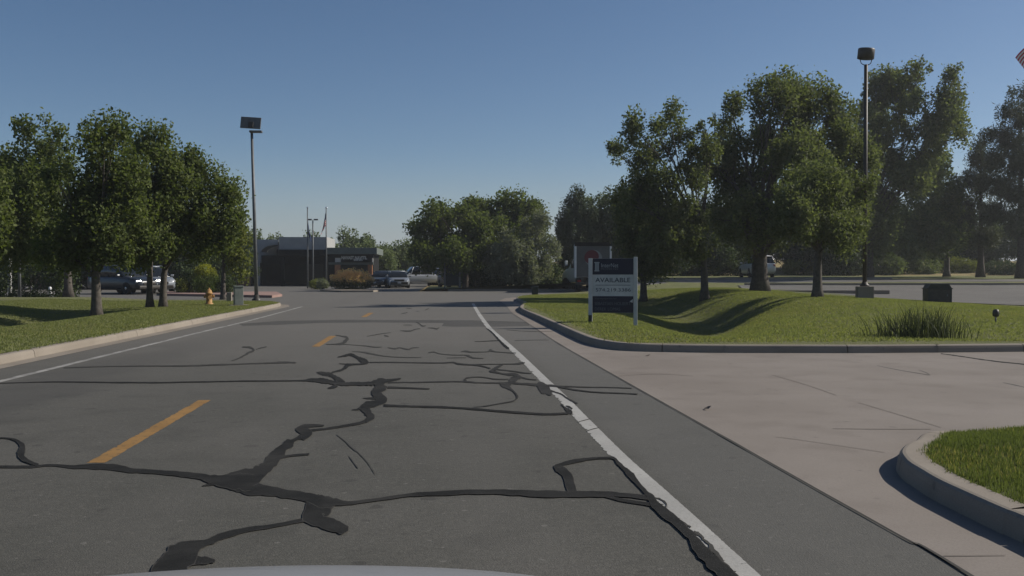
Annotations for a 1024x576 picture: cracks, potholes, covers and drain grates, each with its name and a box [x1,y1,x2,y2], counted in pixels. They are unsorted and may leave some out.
crack [352,328,638,431]
crack [337,434,376,474]
